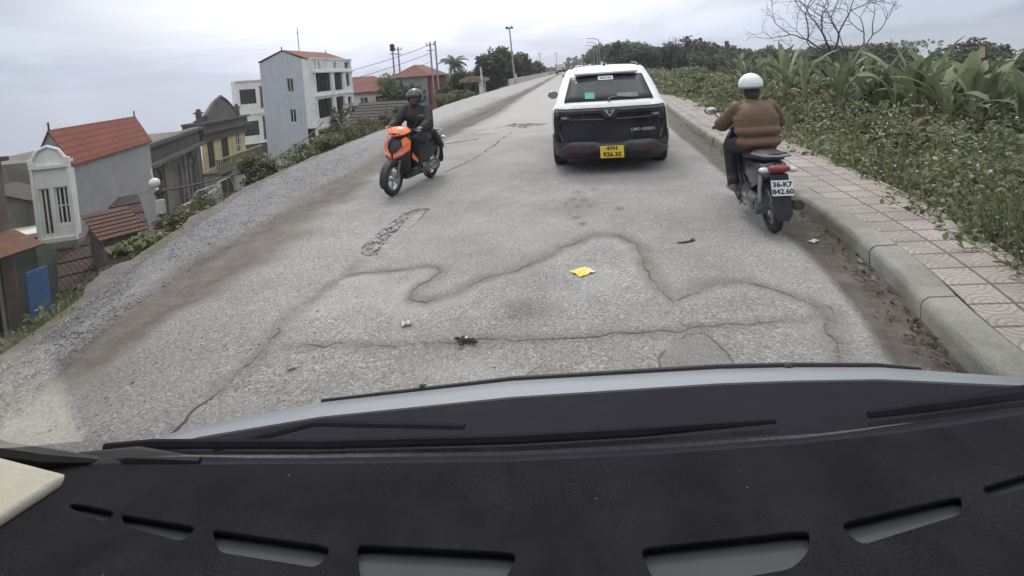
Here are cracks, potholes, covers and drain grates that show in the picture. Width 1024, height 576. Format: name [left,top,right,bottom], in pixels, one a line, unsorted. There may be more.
crack [296,315,820,367]
crack [356,234,841,360]
crack [172,327,282,433]
pothole [353,207,436,259]
